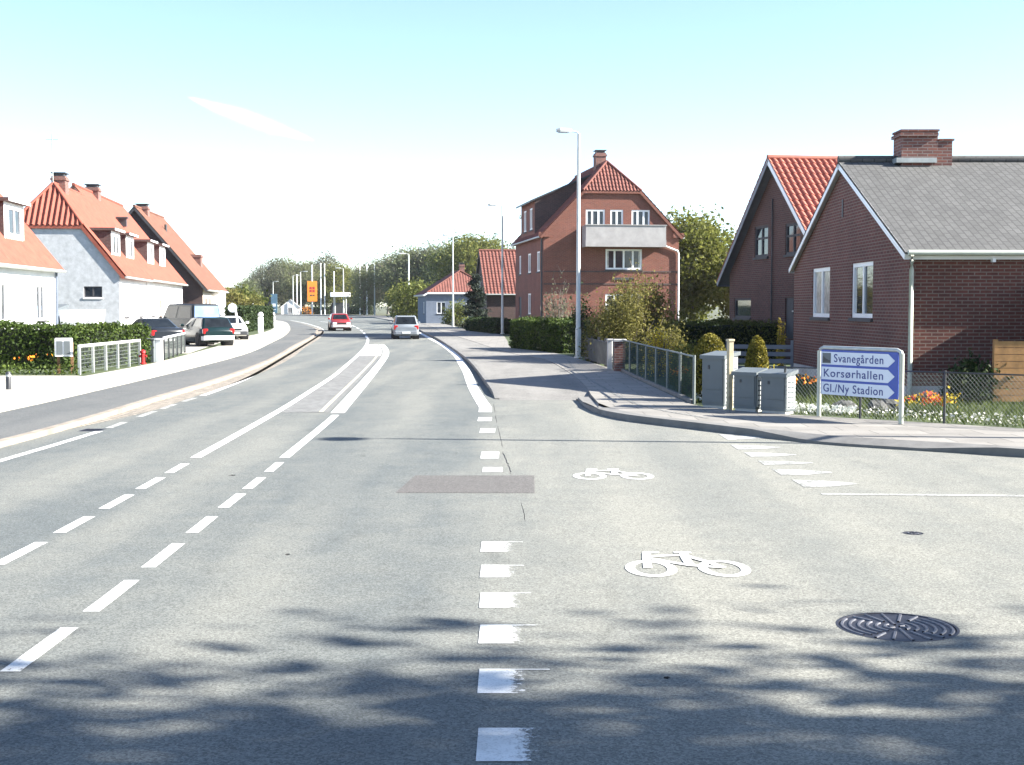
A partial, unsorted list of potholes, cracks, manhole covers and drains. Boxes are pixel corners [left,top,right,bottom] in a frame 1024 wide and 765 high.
manhole cover [836,612,960,642]
